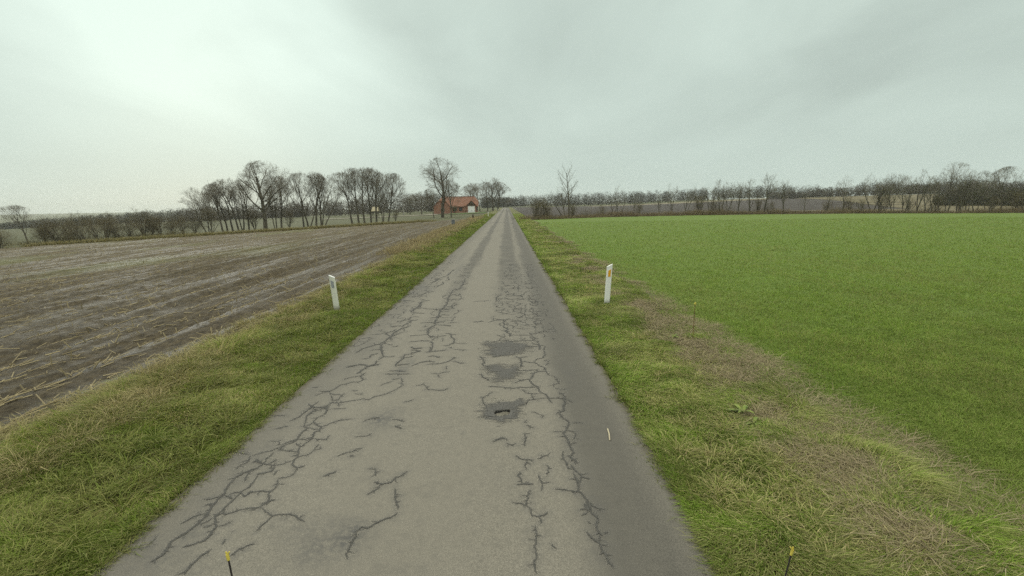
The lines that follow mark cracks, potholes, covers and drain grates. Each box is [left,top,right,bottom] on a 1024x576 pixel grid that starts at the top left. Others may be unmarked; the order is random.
crack [148,260,476,575]
crack [476,264,613,573]
pothole [477,398,525,427]
